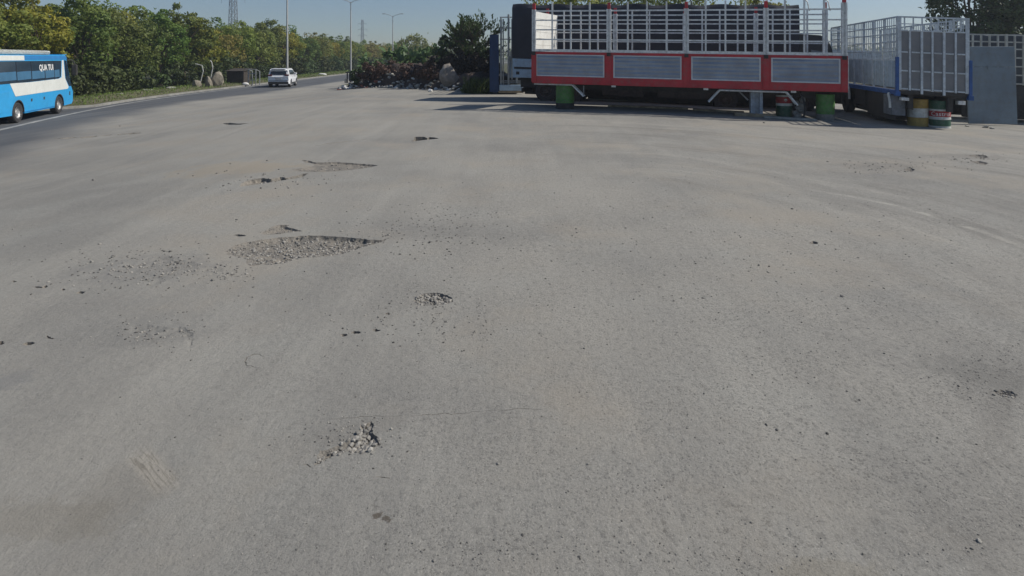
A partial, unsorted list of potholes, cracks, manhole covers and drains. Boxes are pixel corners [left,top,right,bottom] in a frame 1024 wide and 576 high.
pothole [994,389,1018,398]
pothole [121,324,194,351]
pothole [226,235,389,266]
pothole [239,173,308,187]
pothole [415,293,453,306]
pothole [314,421,381,465]
crack [306,408,537,423]
pothole [292,160,378,172]
pothole [260,225,300,235]
